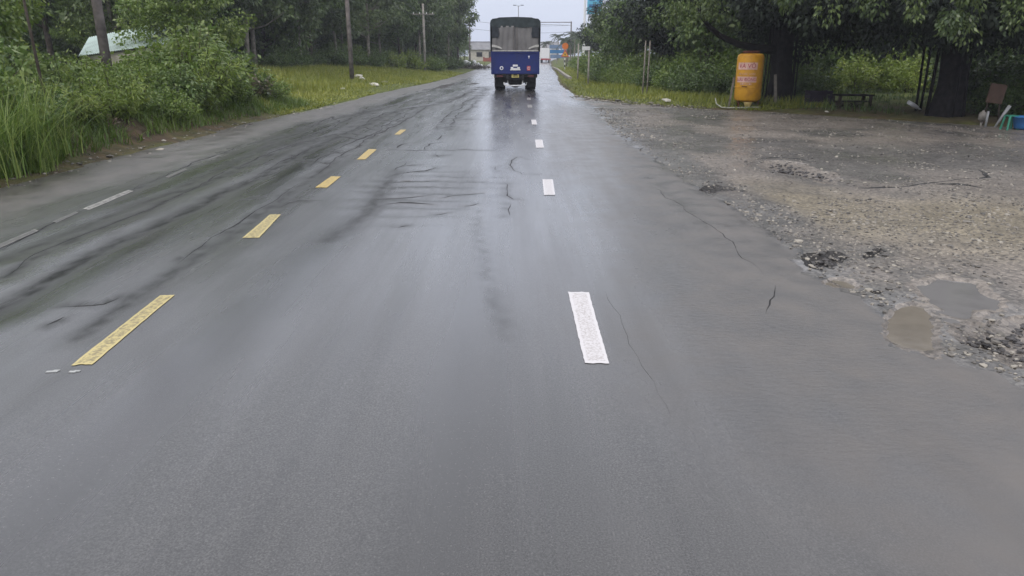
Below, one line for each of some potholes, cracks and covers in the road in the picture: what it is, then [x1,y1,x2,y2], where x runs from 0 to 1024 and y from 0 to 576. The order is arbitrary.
pothole [699,184,736,193]
pothole [758,160,843,185]
pothole [862,248,887,259]
crack [632,179,780,314]
pothole [801,251,847,272]
pothole [903,271,1010,327]
crack [4,92,482,276]
pothole [879,301,946,360]
